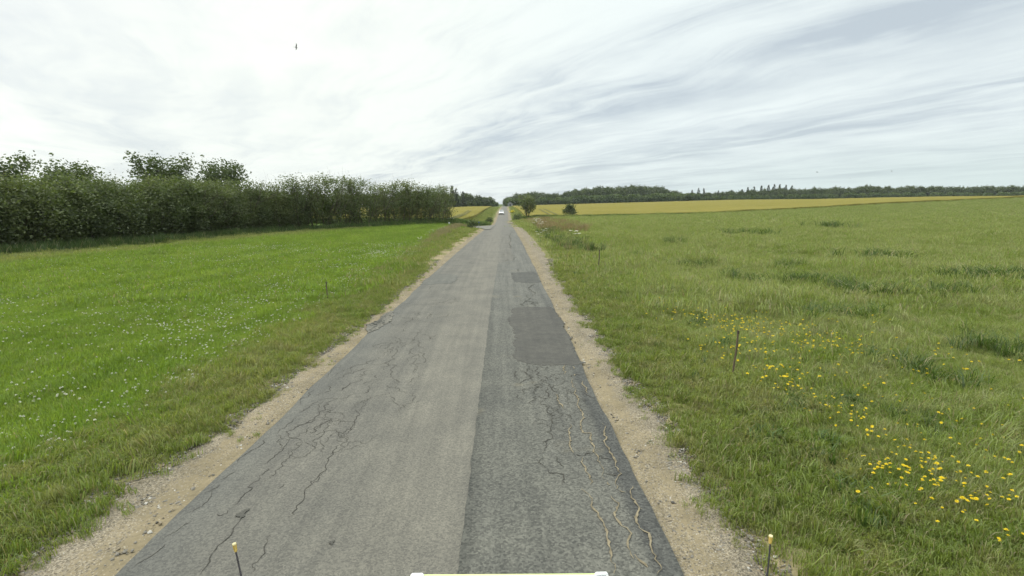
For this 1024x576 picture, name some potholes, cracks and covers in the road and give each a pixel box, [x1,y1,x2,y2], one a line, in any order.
crack [514,362,662,573]
crack [139,282,454,571]
